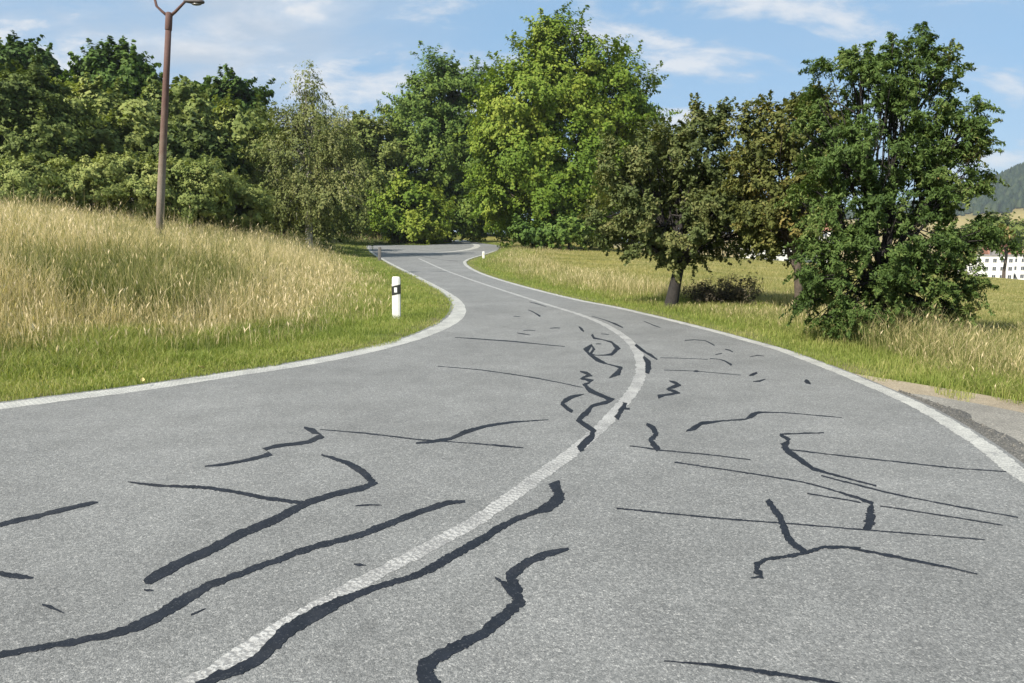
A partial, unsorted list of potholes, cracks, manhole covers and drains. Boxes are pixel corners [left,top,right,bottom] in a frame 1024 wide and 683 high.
crack [617,461,1018,540]
crack [664,660,840,683]
crack [660,339,733,366]
